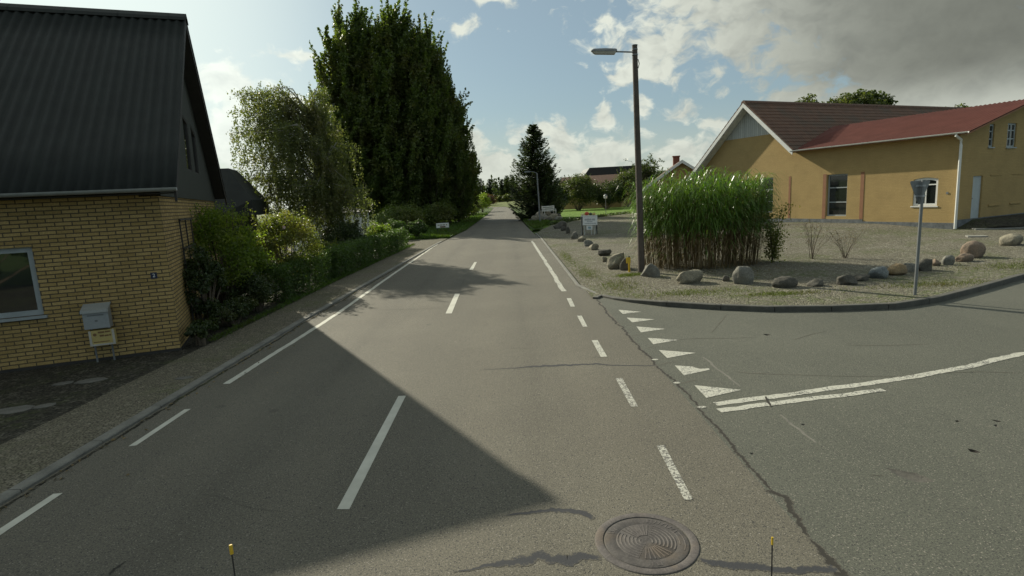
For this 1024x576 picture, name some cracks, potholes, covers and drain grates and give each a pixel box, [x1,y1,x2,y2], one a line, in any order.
crack [765,490,853,576]
manhole cover [595,513,700,575]
crack [107,559,129,576]
